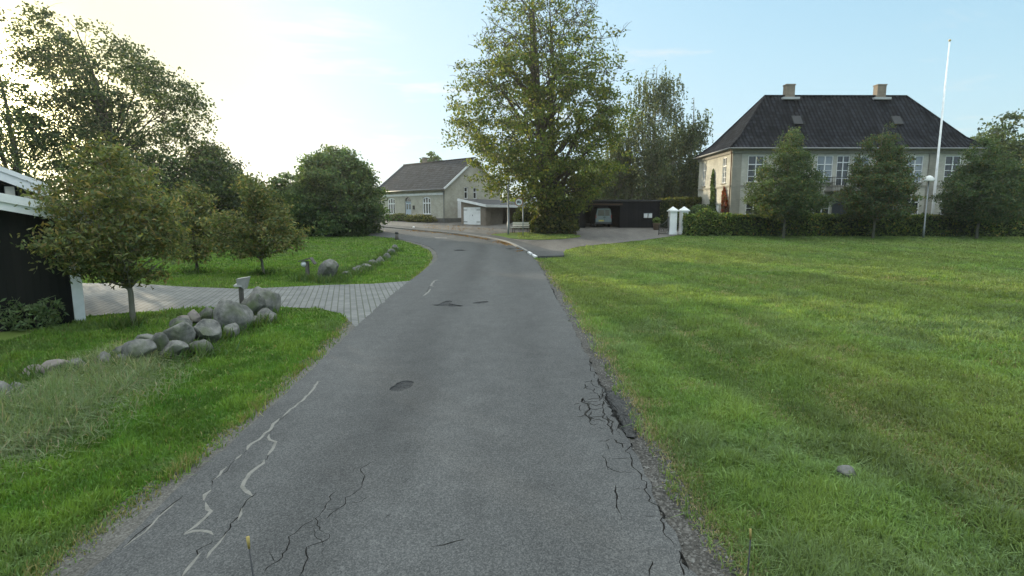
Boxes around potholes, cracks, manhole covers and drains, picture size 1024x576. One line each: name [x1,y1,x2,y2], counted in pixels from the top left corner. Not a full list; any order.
pothole [390,380,414,391]
crack [123,381,368,576]
crack [574,361,689,575]
